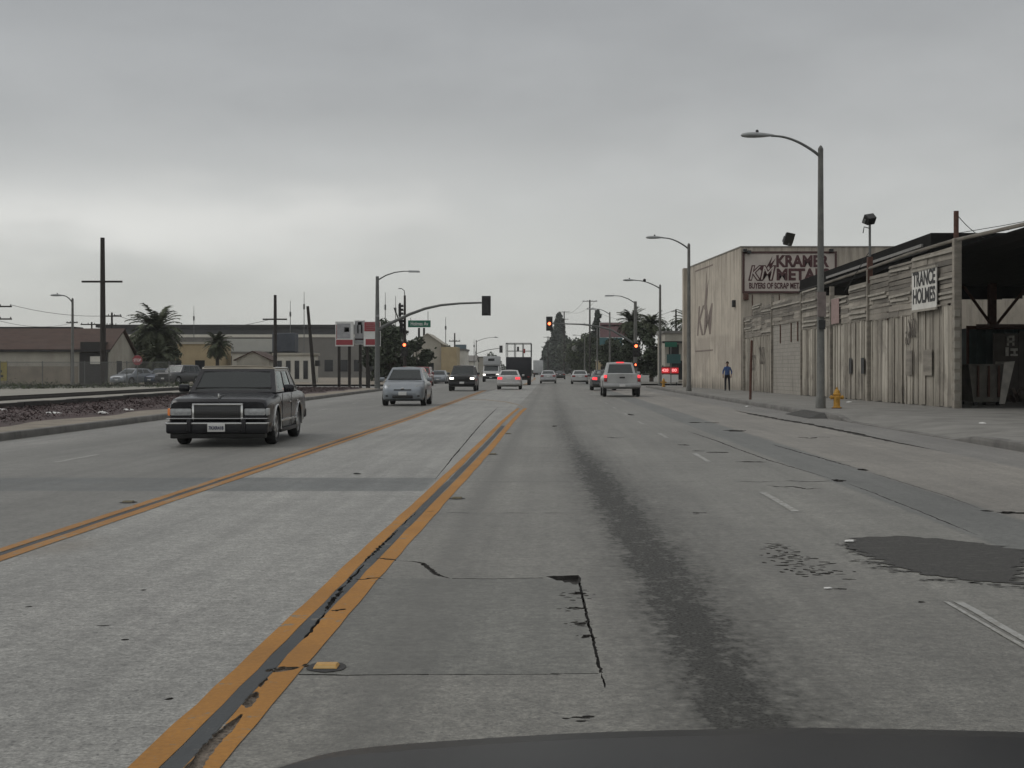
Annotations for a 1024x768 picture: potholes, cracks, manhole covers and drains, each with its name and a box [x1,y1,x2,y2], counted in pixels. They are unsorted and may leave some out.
crack [304,514,449,638]
